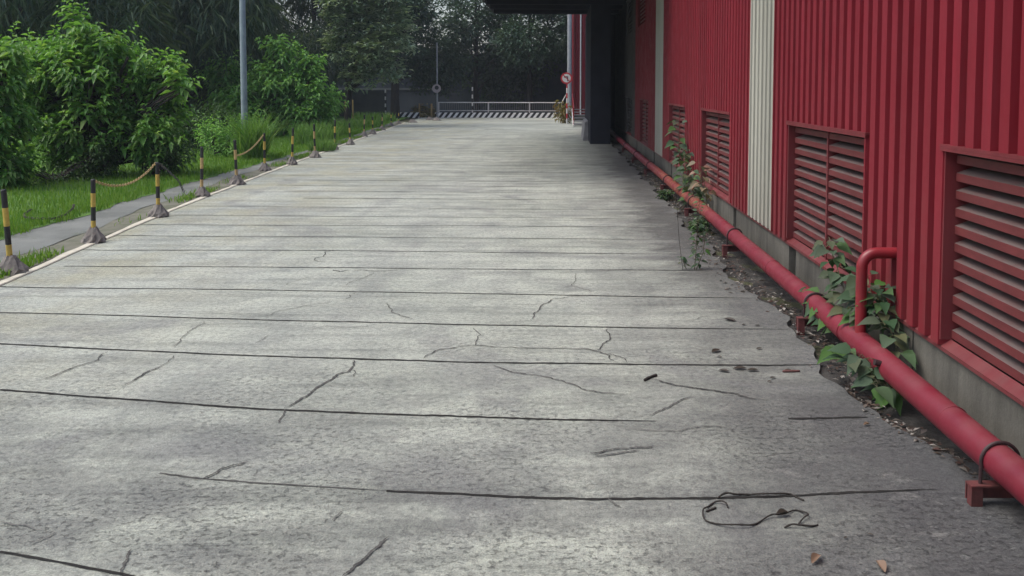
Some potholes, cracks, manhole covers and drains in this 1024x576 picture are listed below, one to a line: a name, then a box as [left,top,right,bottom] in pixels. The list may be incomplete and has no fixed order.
crack [278,360,356,423]
crack [424,328,627,362]
crack [125,323,204,385]
crack [496,366,622,395]
crack [342,537,387,576]
crack [590,379,758,455]
crack [518,275,593,321]
